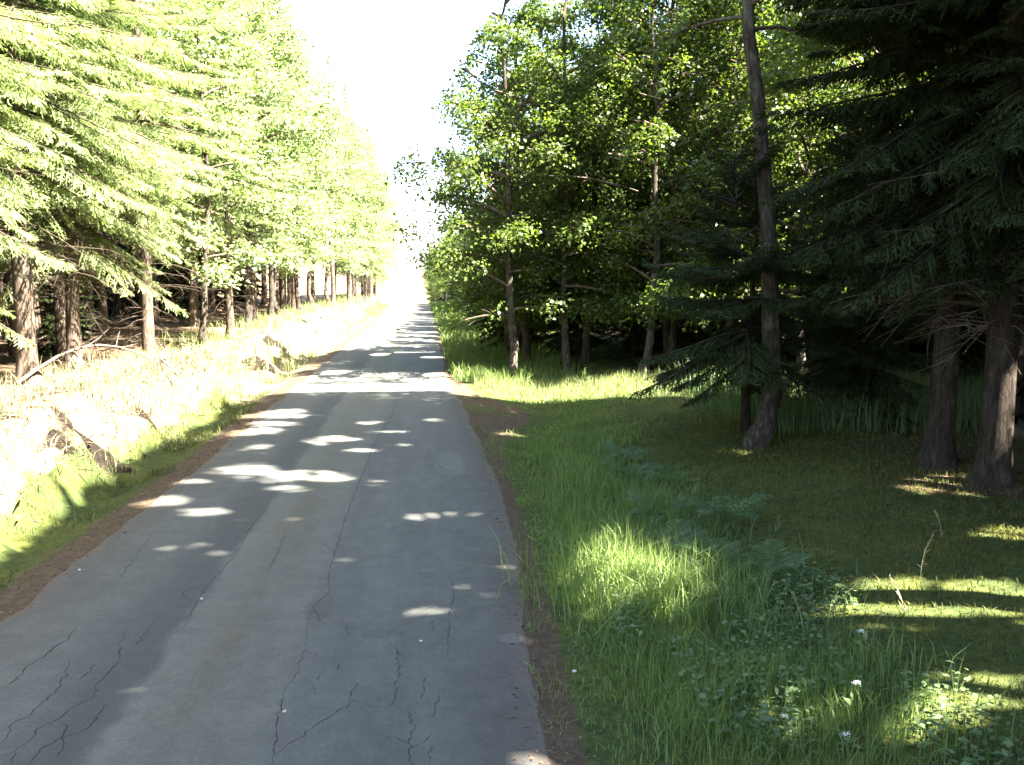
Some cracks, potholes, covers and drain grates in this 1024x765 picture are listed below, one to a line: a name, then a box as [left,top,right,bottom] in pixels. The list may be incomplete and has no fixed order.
crack [432,576,462,658]
crack [272,393,440,765]
crack [1,621,154,764]
